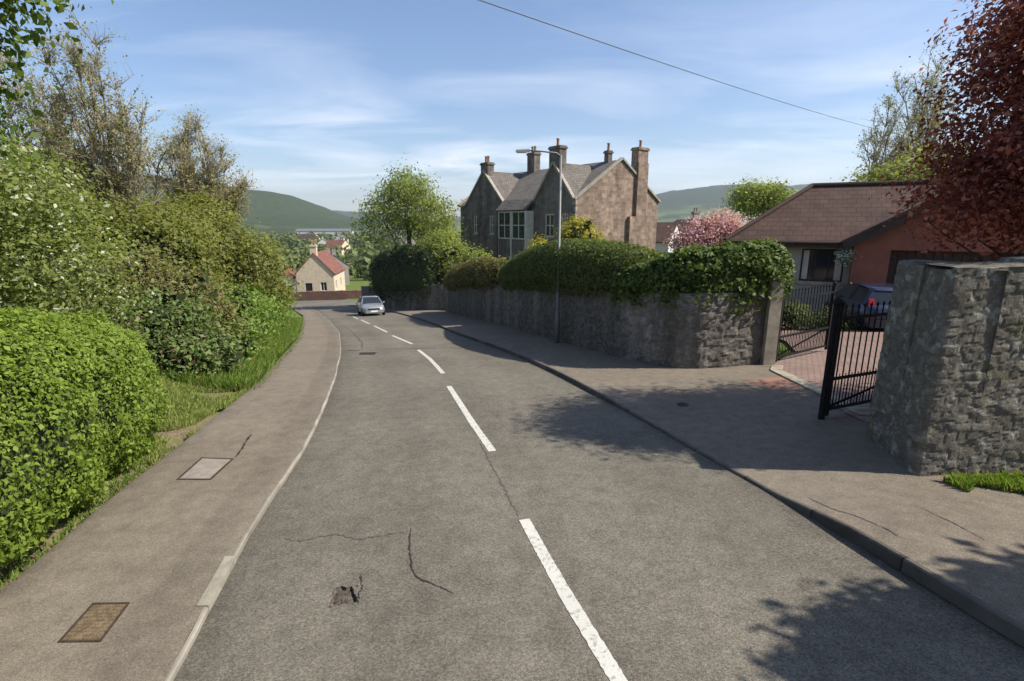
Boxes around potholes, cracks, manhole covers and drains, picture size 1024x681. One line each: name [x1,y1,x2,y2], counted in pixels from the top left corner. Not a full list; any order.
pothole [329,585,363,607]
crack [480,444,519,516]
crack [808,497,901,537]
crack [284,530,455,594]
manhole cover [176,457,234,480]
manhole cover [57,602,130,643]
